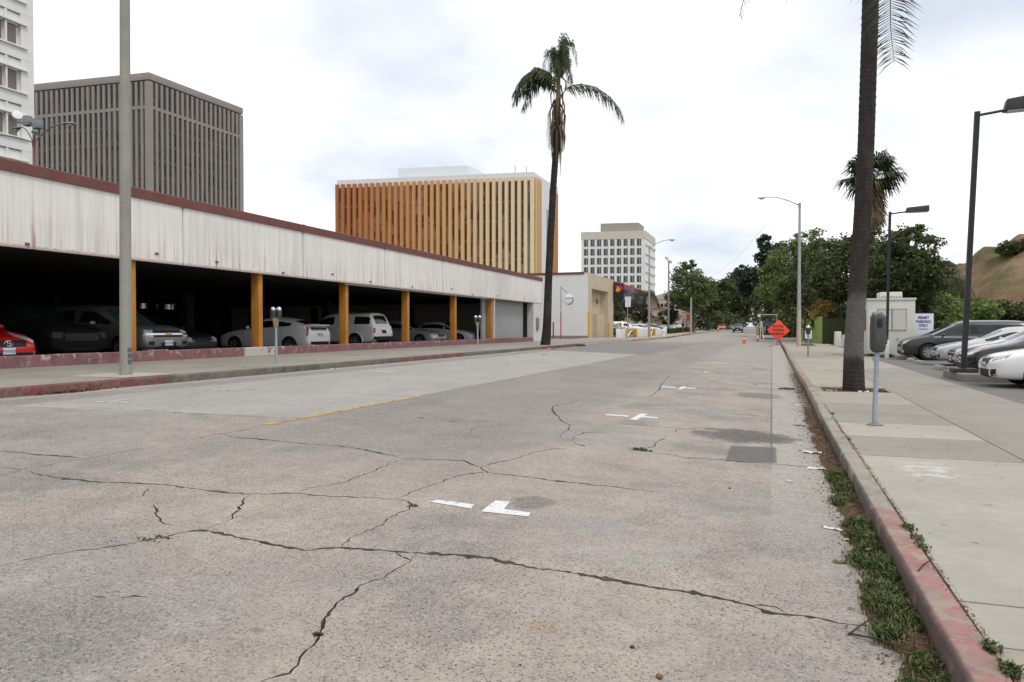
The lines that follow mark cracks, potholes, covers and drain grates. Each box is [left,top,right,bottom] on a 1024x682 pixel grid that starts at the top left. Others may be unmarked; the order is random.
crack [0,393,872,682]
